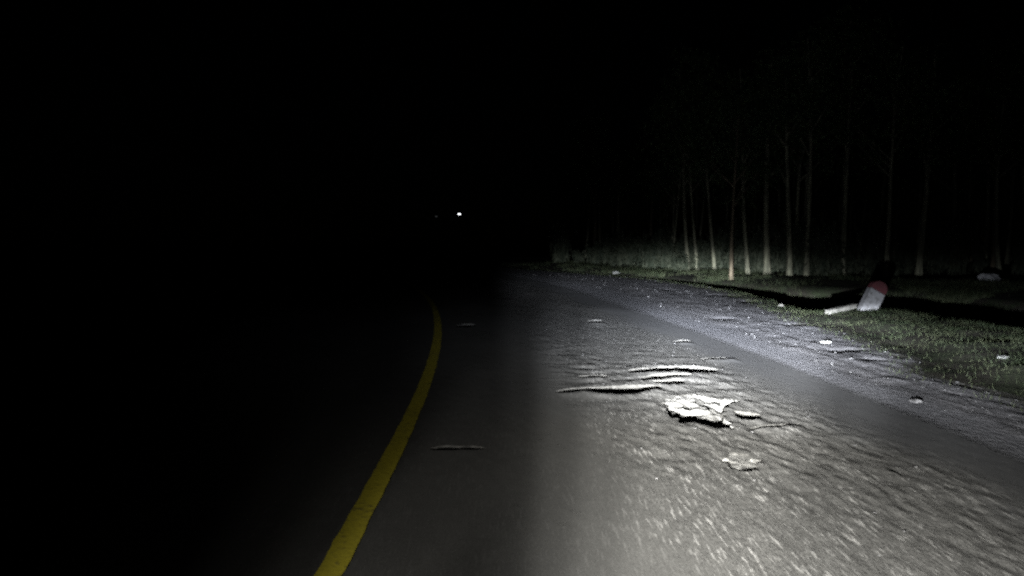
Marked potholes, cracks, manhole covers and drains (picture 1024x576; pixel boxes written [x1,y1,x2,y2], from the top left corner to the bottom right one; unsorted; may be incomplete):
pothole [659,394,740,429]
pothole [721,452,762,472]
